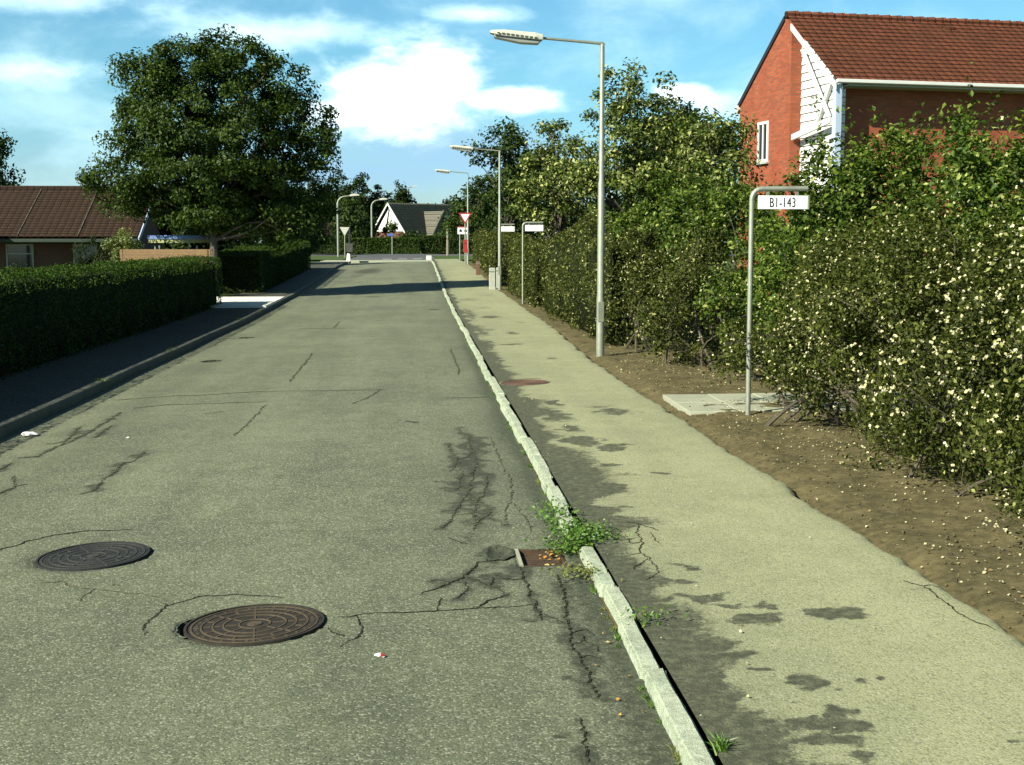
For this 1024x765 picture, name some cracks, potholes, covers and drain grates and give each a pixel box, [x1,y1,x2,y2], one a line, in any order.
crack [903,580,996,630]
crack [579,717,589,762]
crack [81,451,144,494]
crack [0,529,132,550]
drain grate [514,549,567,567]
manhole cover [499,379,549,390]
crack [23,353,383,458]
manhole cover [35,541,150,572]
crack [442,428,532,544]
manhole cover [183,604,324,647]
crack [625,521,659,580]
crack [326,560,542,647]
